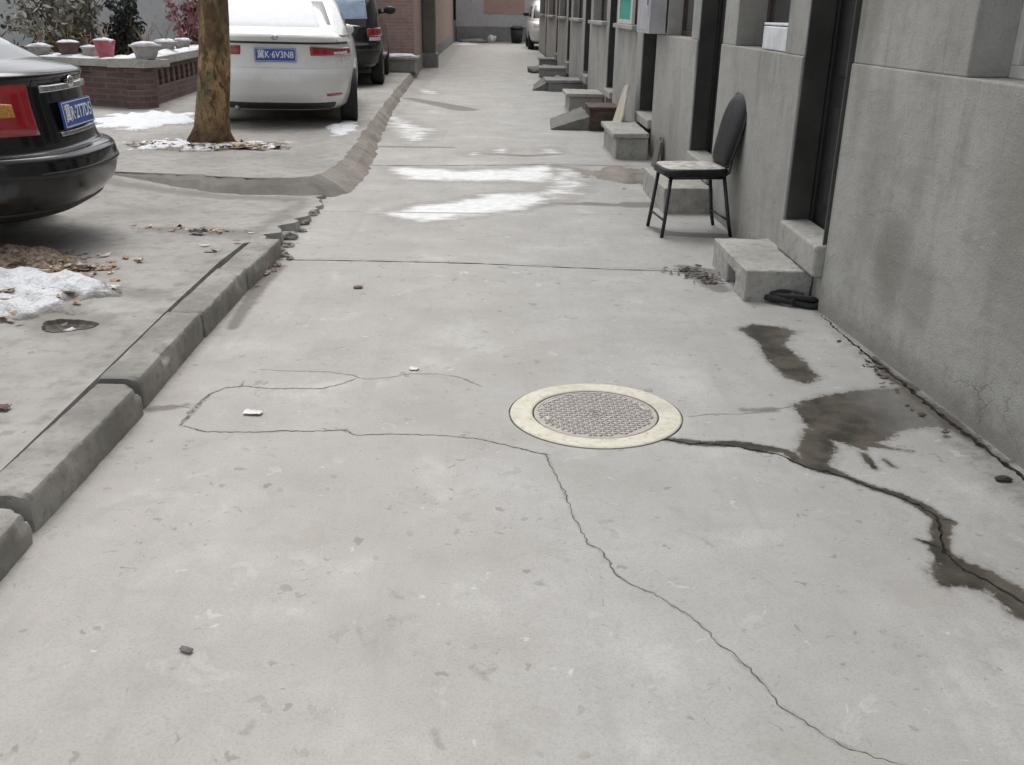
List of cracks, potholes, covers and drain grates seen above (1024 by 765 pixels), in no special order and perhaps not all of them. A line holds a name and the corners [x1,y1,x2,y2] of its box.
crack [154,315,1024,765]
manhole cover [509,384,683,450]
